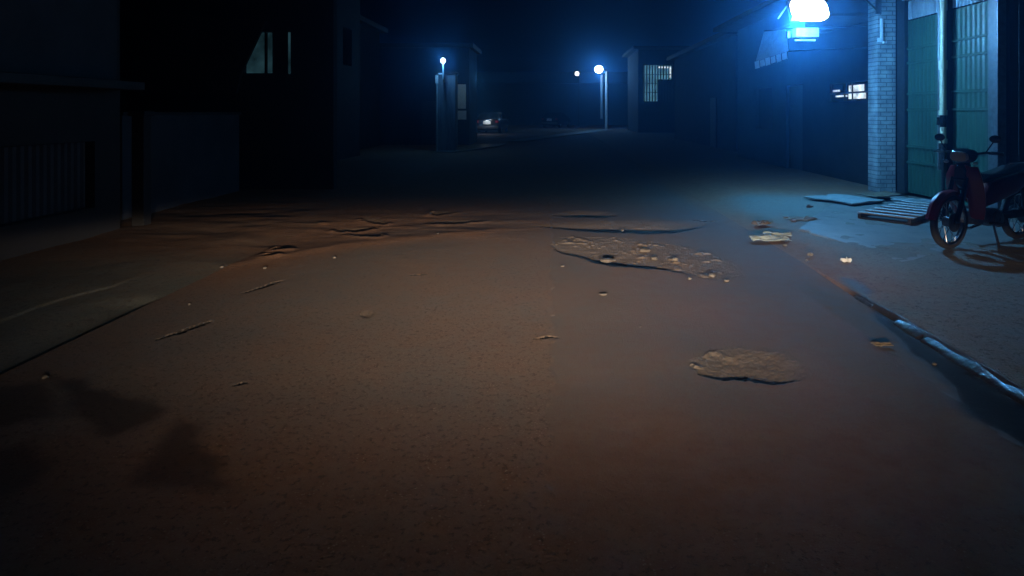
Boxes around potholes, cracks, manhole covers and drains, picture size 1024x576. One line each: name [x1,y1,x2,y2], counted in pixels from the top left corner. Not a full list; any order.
crack [155,321,210,341]
crack [245,281,283,293]
pothole [551,235,748,282]
